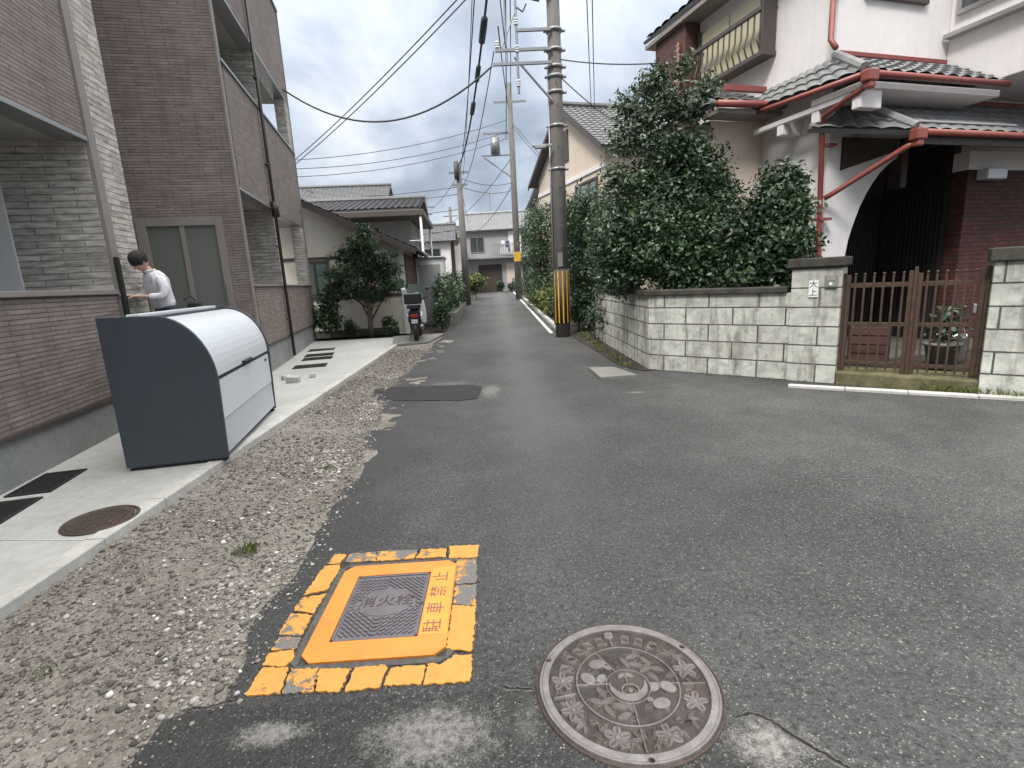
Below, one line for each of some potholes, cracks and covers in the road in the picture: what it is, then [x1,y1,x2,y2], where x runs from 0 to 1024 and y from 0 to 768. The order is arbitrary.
crack [734,710,853,768]
manhole cover [58,505,141,536]
manhole cover [536,624,727,768]
manhole cover [290,558,458,671]
crack [499,684,536,692]
drain grate [3,468,87,498]
drain grate [0,496,43,524]
